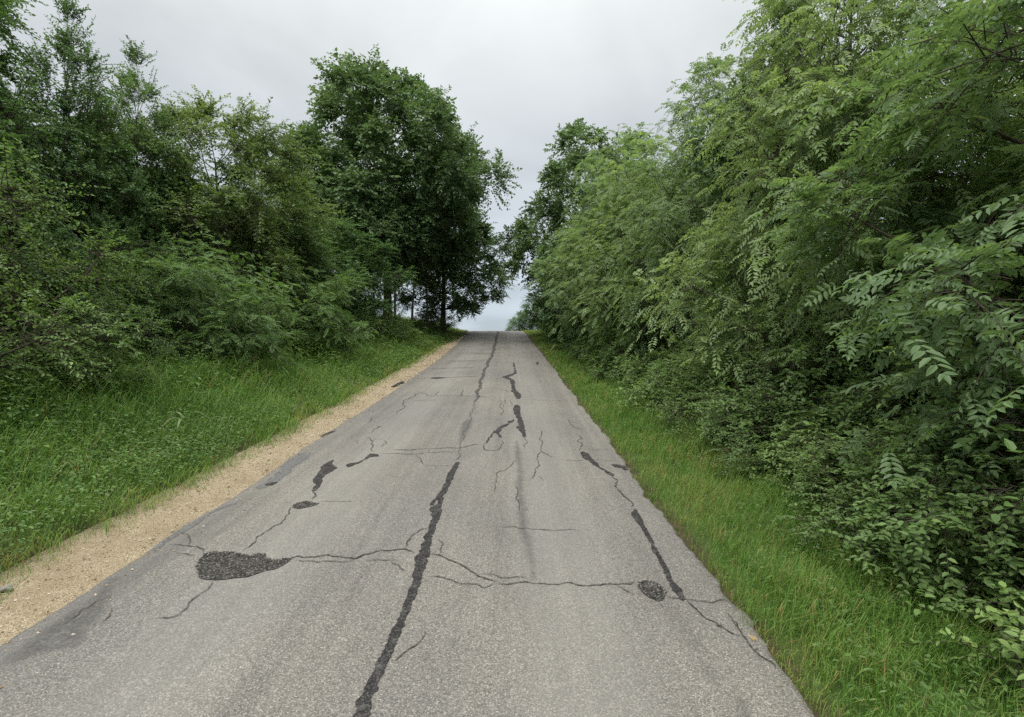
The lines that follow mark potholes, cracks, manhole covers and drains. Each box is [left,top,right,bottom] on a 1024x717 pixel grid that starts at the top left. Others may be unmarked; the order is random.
crack [494,422,634,530]
crack [668,596,776,669]
crack [154,583,212,618]
crack [357,360,513,466]
crack [432,538,634,592]
crack [290,528,423,570]
